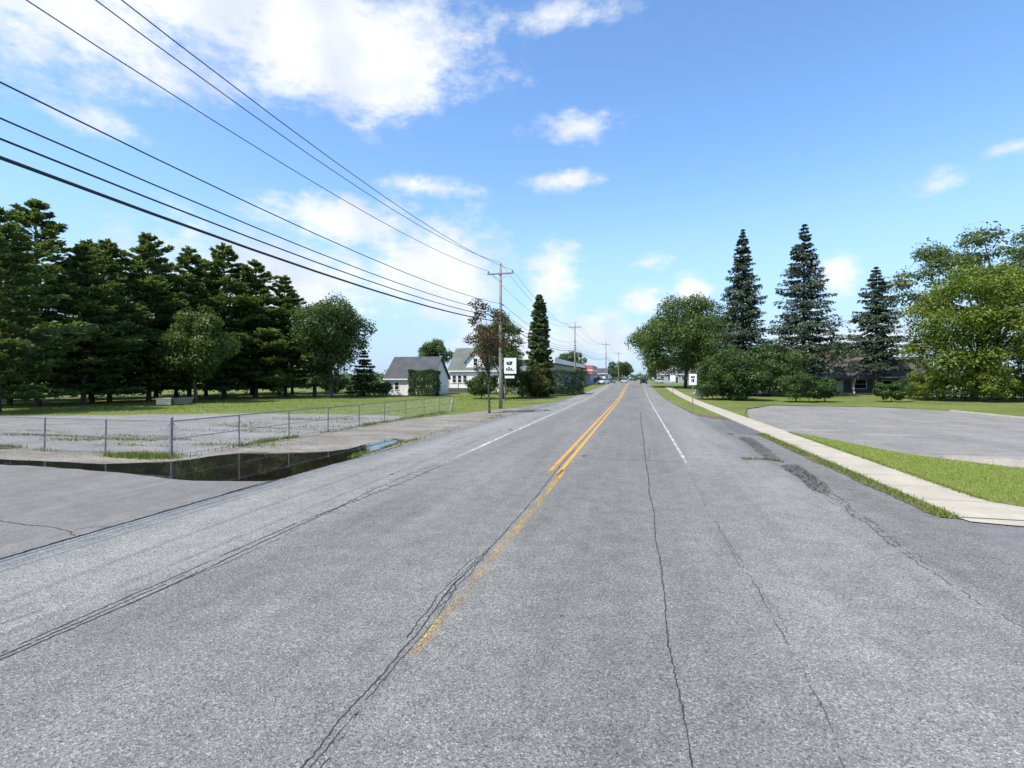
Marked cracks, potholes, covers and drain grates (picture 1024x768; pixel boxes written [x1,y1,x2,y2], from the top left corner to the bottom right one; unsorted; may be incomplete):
crack [300,451,574,768]
crack [0,465,441,660]
crack [616,413,845,768]
